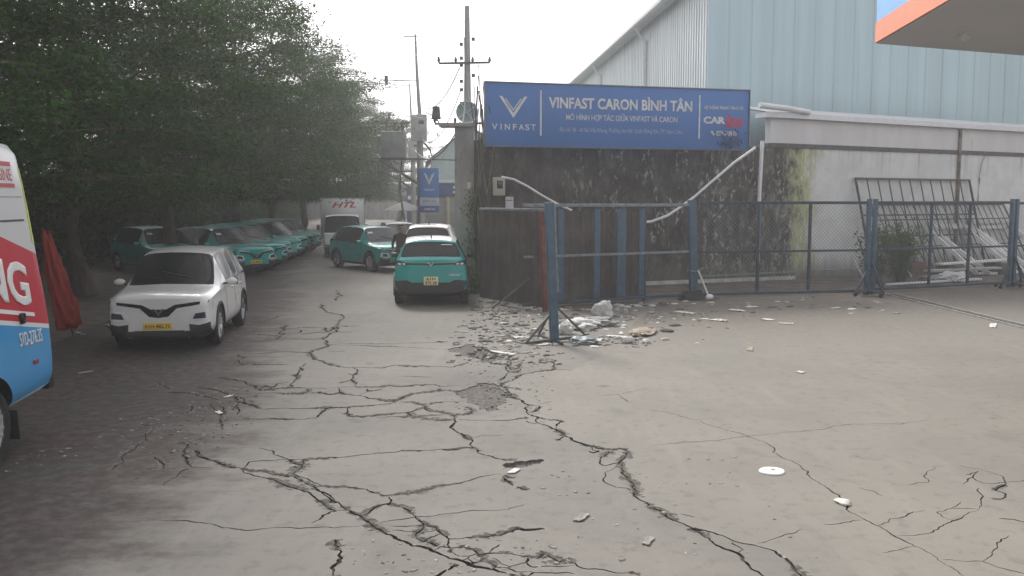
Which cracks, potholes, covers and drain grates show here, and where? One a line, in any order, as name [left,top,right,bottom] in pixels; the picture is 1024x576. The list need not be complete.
crack [108,290,813,576]
crack [648,409,1024,576]
pothole [455,383,508,412]
pothole [448,344,504,362]
